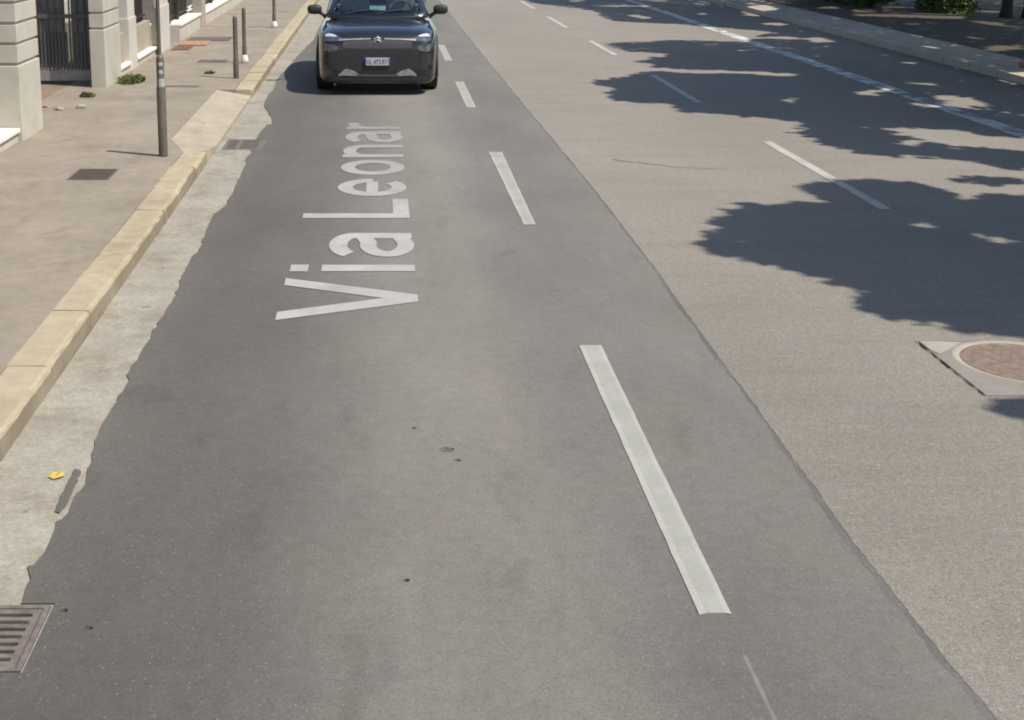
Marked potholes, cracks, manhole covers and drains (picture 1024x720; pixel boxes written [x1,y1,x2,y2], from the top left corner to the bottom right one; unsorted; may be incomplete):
utility cover [66,169,119,180]
crack [612,159,728,170]
manhole cover [920,341,1024,396]
drain grate [222,139,265,150]
drain grate [0,605,51,673]
